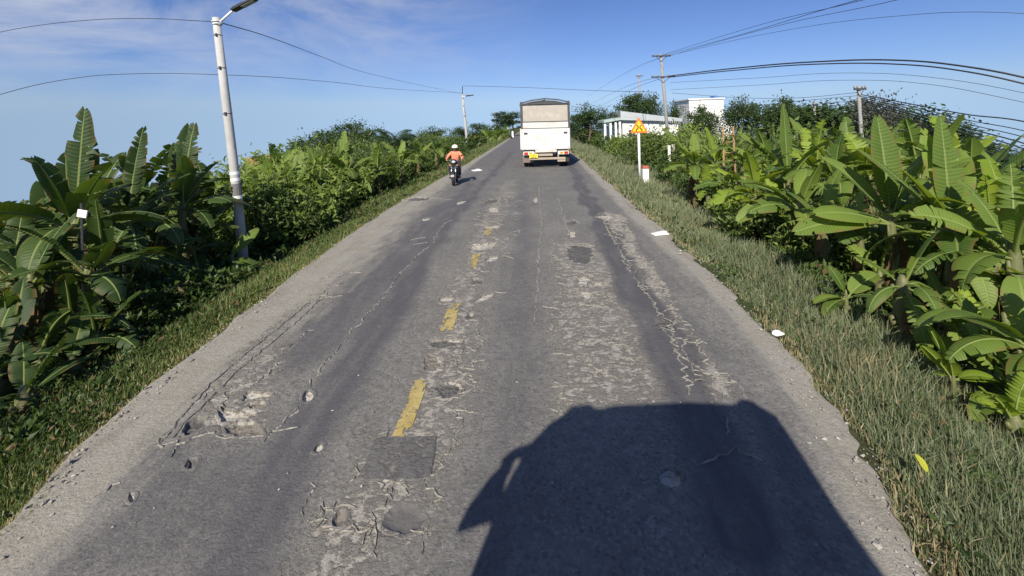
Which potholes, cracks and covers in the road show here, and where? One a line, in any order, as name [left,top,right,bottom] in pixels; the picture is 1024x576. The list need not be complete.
pothole [429,380,466,401]
pothole [243,397,271,415]
pothole [124,491,140,505]
pothole [221,420,267,439]
pothole [560,244,598,265]
pothole [178,414,211,438]
pothole [238,388,275,405]
pothole [214,404,259,428]
crack [301,326,485,557]
crack [152,219,453,452]
crack [534,186,778,474]
pothole [180,455,202,472]
